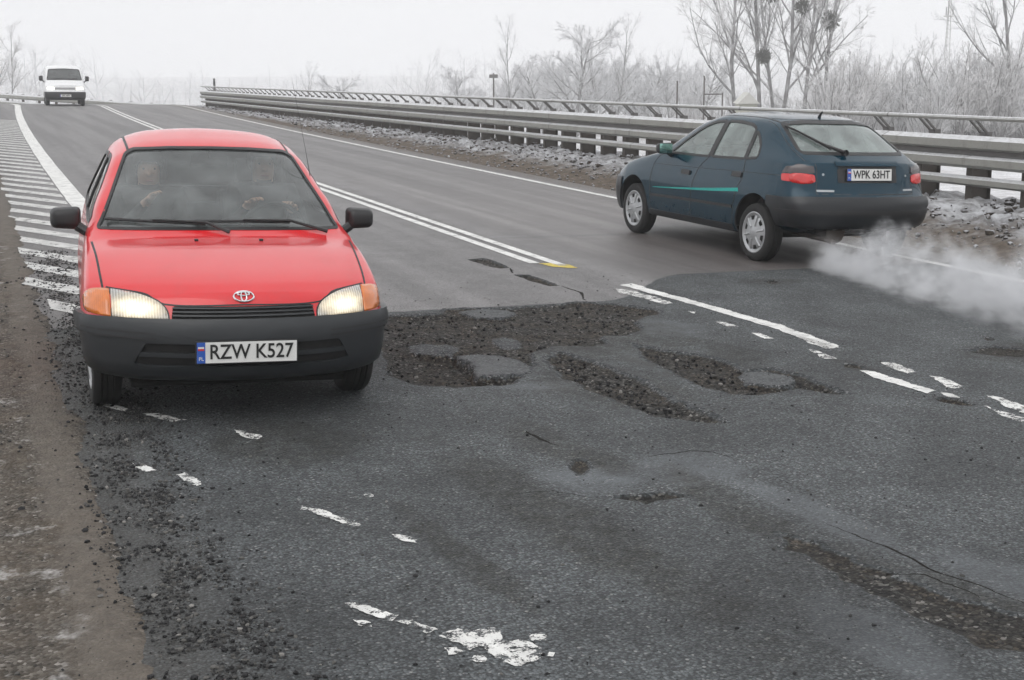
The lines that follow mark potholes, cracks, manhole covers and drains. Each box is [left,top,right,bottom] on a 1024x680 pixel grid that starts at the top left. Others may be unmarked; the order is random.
pothole [541,351,732,424]
pothole [772,531,1024,654]
pothole [567,457,594,476]
pothole [627,341,853,396]
crack [526,431,559,446]
pothole [379,301,665,388]
crack [825,523,1024,603]
pothole [964,345,1024,358]
crack [648,450,732,458]
pothole [600,492,695,504]
